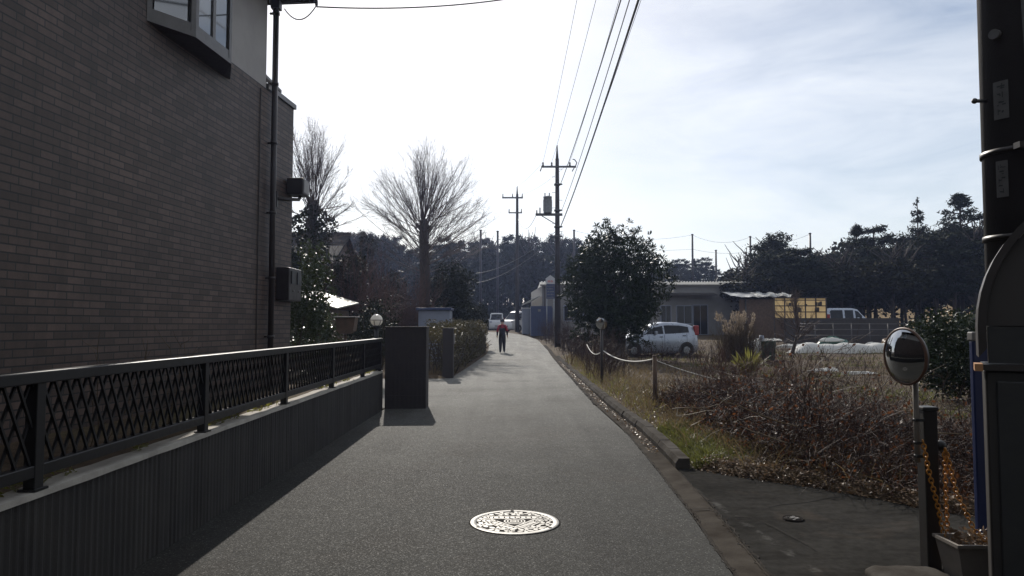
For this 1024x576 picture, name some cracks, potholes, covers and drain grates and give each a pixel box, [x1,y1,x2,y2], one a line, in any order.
manhole cover [469,510,561,535]
